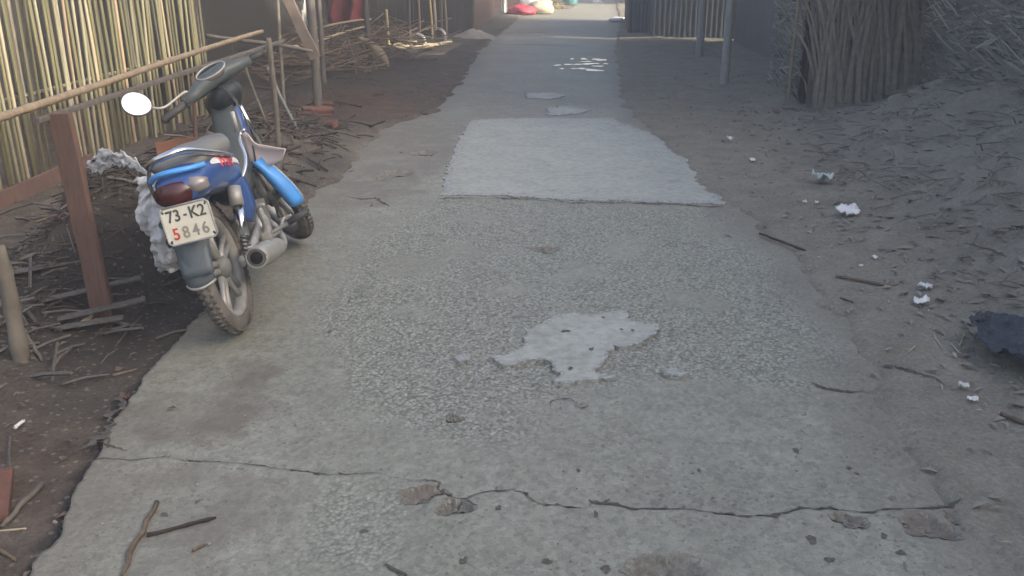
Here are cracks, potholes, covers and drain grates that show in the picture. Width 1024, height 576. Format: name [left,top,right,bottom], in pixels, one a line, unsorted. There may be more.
crack [416,479,961,518]
crack [78,392,378,474]
crack [810,362,950,393]
